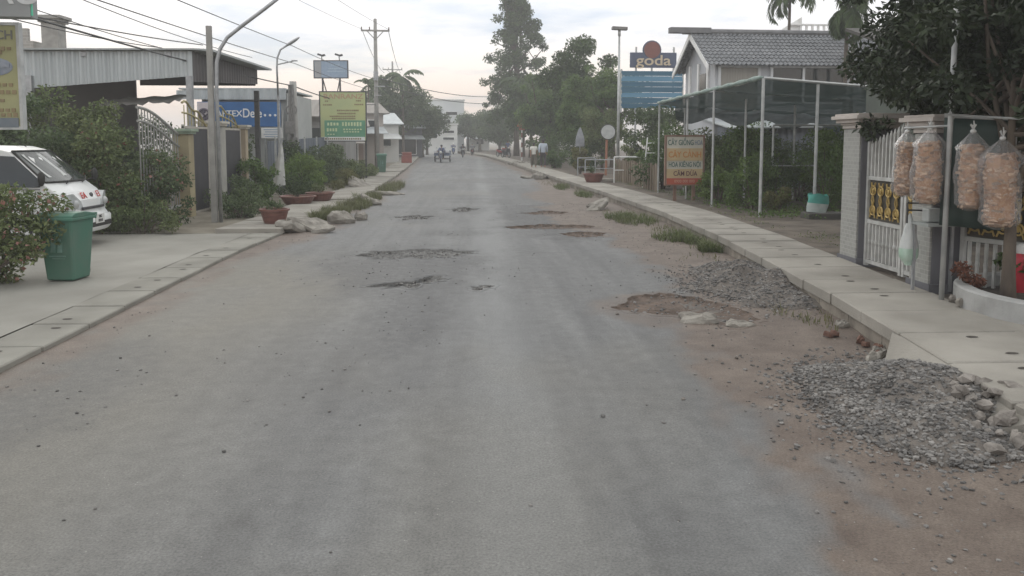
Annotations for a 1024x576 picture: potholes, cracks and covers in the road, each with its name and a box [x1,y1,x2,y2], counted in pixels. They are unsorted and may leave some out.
pothole [360,275,452,290]
pothole [552,231,613,239]
pothole [464,284,500,292]
pothole [604,291,769,330]
pothole [350,248,479,260]
